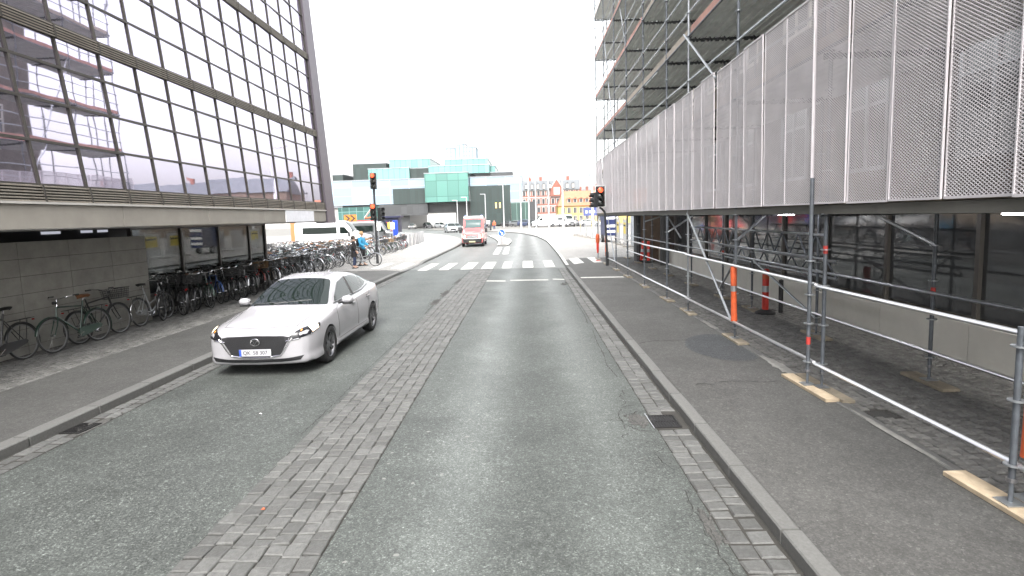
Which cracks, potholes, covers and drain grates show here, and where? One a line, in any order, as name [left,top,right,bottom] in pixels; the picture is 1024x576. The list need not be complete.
crack [685,491,739,576]
drain grate [59,423,102,434]
crack [565,282,673,469]
drain grate [648,414,682,428]
